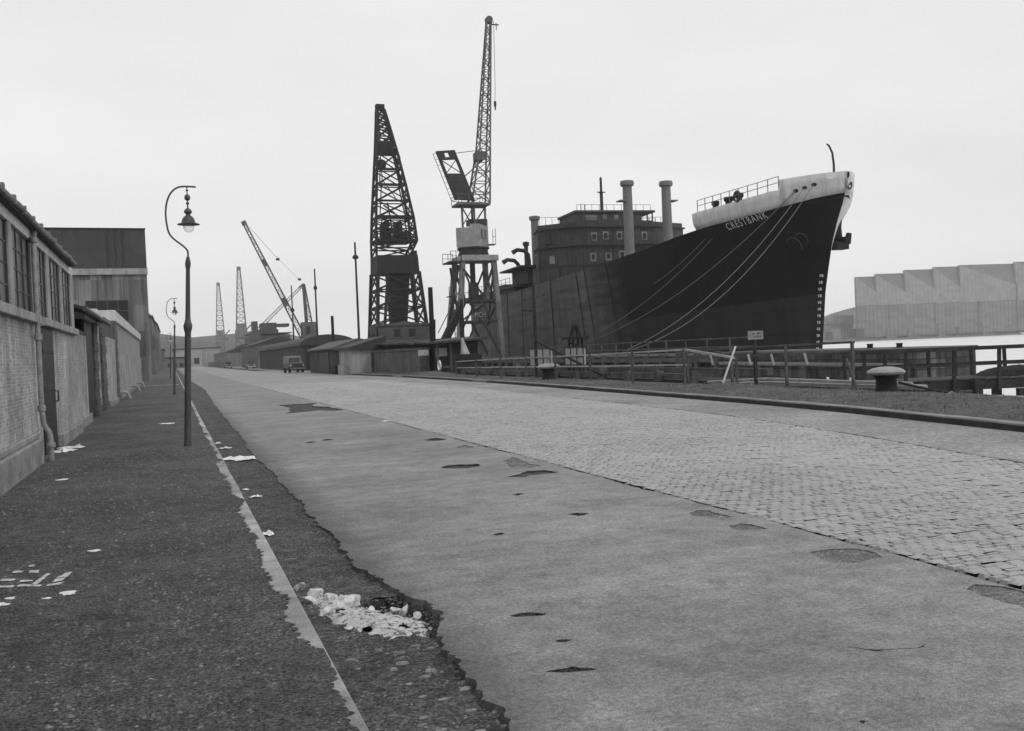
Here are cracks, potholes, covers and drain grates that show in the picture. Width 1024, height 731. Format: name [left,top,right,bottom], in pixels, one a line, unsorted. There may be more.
pothole [280,403,343,414]
